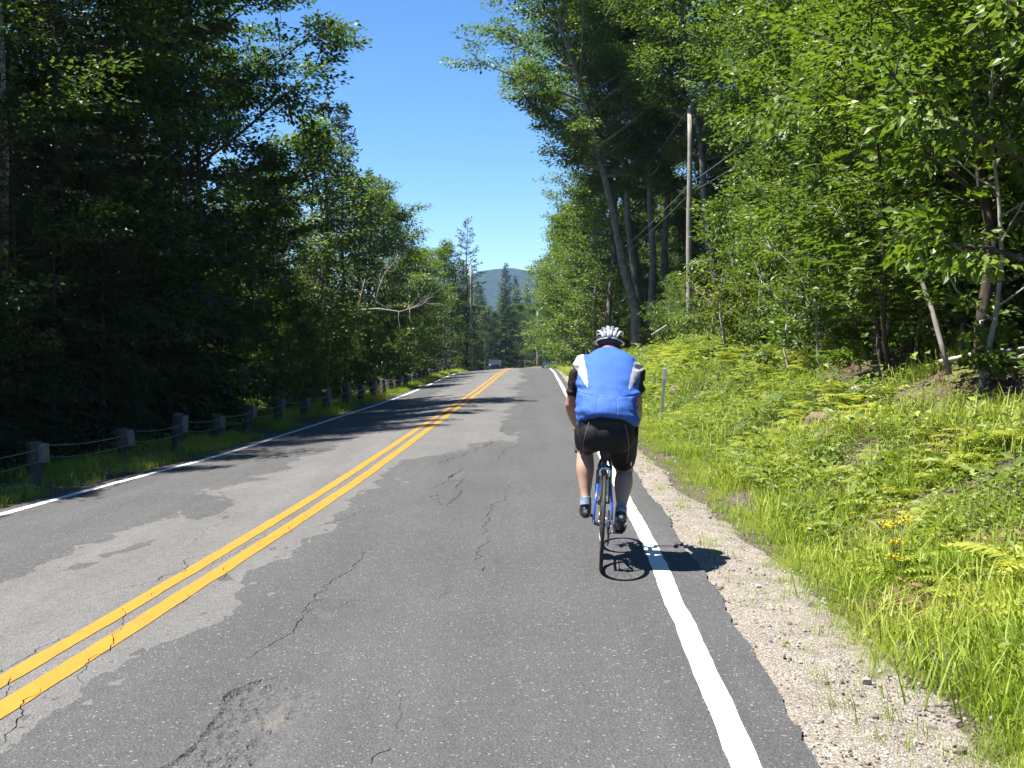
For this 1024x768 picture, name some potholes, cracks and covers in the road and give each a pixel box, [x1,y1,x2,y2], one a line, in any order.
crack [245,546,374,660]
crack [475,482,513,571]
crack [430,440,517,508]
pothole [161,676,332,768]
